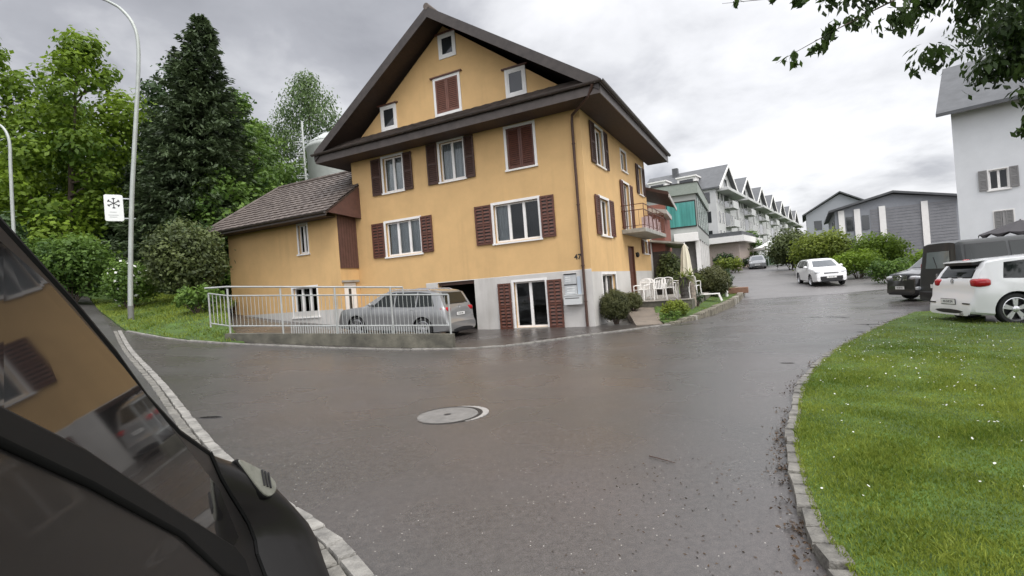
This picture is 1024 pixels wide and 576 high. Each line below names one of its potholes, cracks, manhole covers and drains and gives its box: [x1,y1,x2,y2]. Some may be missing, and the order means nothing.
manhole cover [417,406,489,425]
